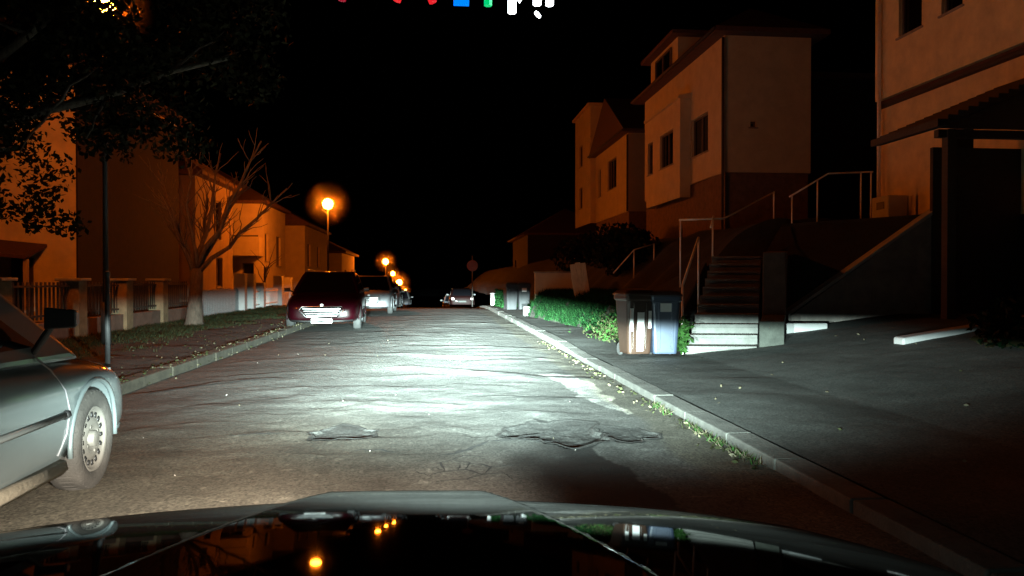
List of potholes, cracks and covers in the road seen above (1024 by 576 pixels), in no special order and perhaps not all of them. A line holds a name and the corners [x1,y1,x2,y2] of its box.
crack [414,433,553,485]
pothole [495,419,615,449]
pothole [595,425,664,443]
pothole [307,423,379,441]
